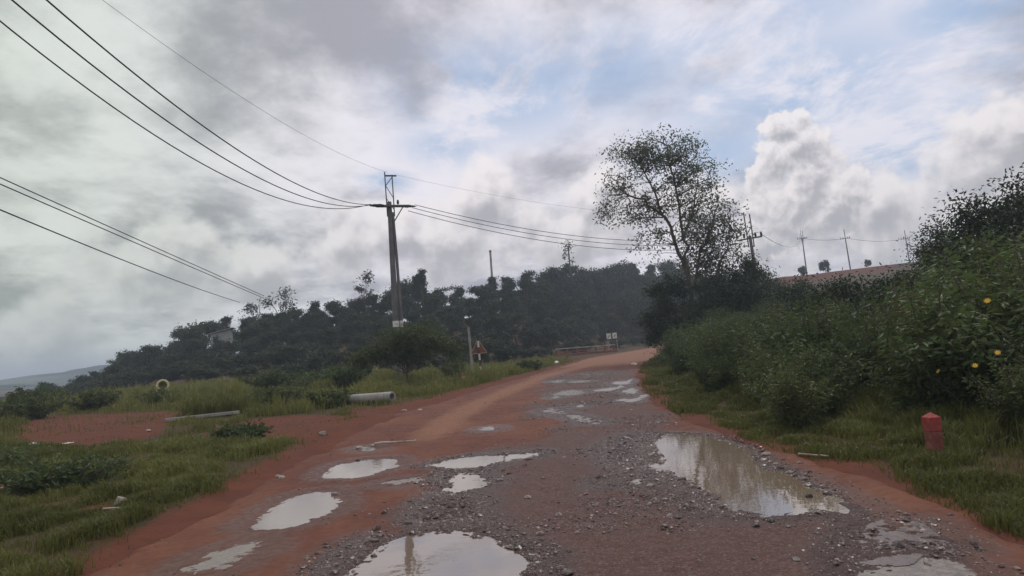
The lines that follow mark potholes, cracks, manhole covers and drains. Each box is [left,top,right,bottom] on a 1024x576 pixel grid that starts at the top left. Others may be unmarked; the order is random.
pothole [318,458,409,479]
pothole [342,529,546,576]
pothole [843,518,964,567]
pothole [422,451,541,471]
pothole [538,408,602,424]
pothole [852,556,984,576]
pothole [612,394,651,403]
pothole [639,433,870,519]
pothole [428,472,495,494]
pothole [244,489,346,532]
pothole [176,539,269,576]
pothole [619,388,642,396]
